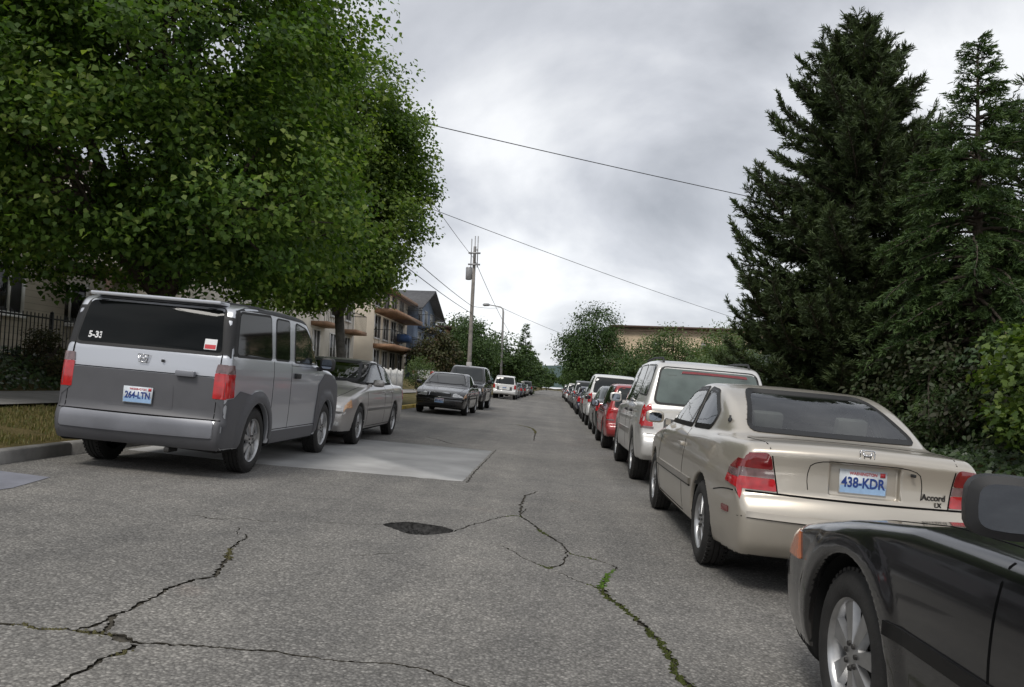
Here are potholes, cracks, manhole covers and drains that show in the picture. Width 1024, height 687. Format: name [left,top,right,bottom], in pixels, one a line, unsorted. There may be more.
pothole [383,522,453,535]
crack [454,492,696,687]
crack [0,515,470,687]
